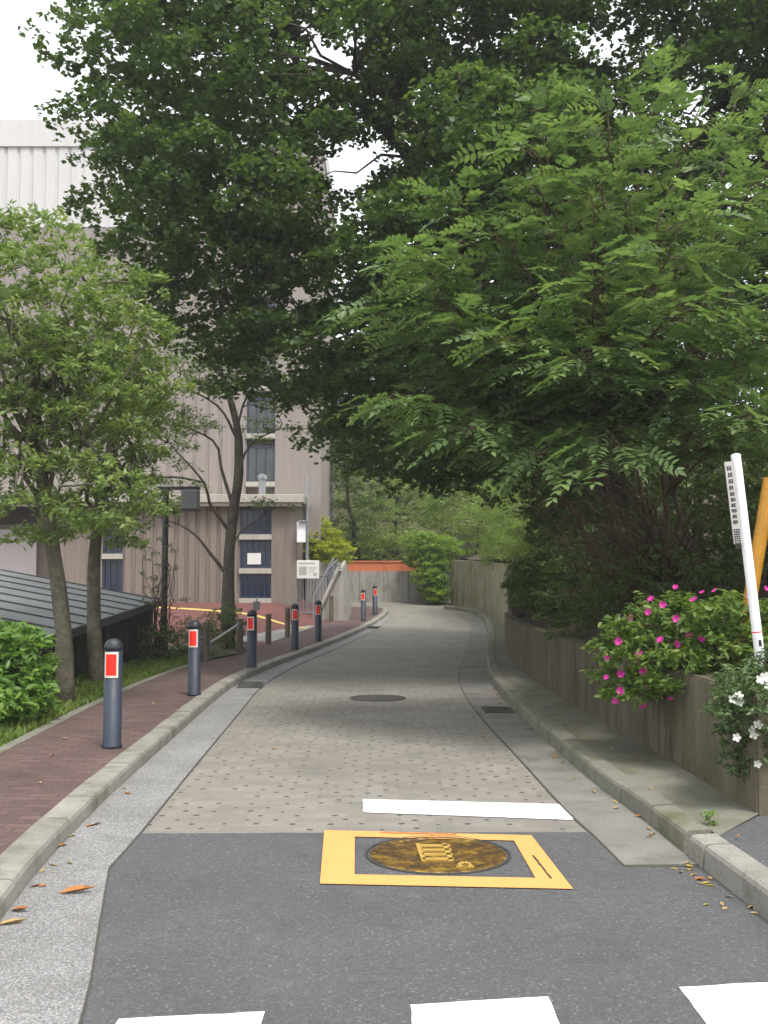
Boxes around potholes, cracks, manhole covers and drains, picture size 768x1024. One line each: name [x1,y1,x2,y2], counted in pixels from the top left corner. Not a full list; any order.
manhole cover [365,835,511,875]
